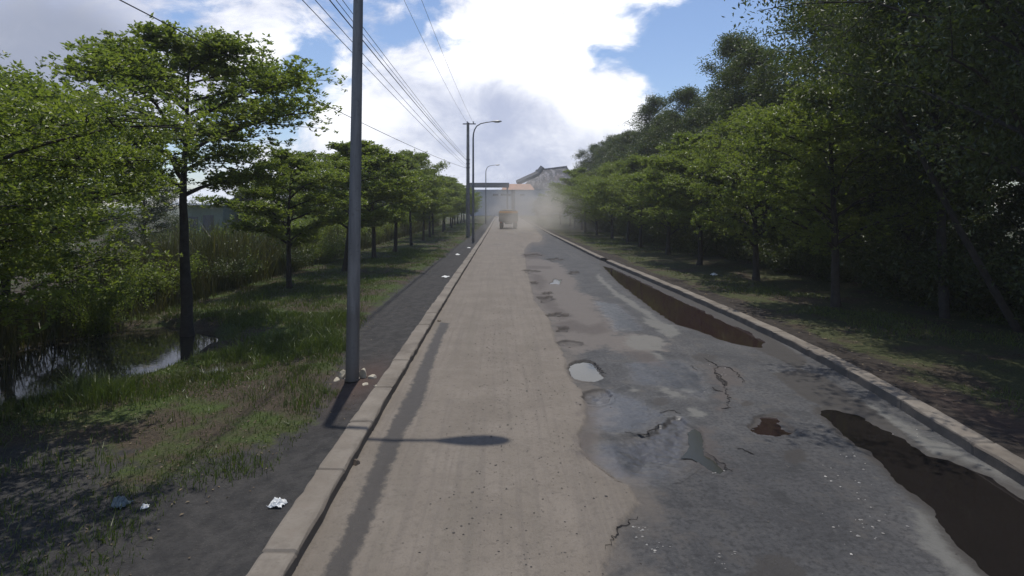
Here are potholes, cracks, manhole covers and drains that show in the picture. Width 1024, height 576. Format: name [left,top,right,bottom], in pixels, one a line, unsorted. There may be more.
crack [696,358,745,409]
pothole [578,387,617,407]
pothole [564,358,609,383]
pothole [553,339,588,348]
pothole [743,412,803,438]
crack [605,516,638,549]
pothole [534,295,557,304]
